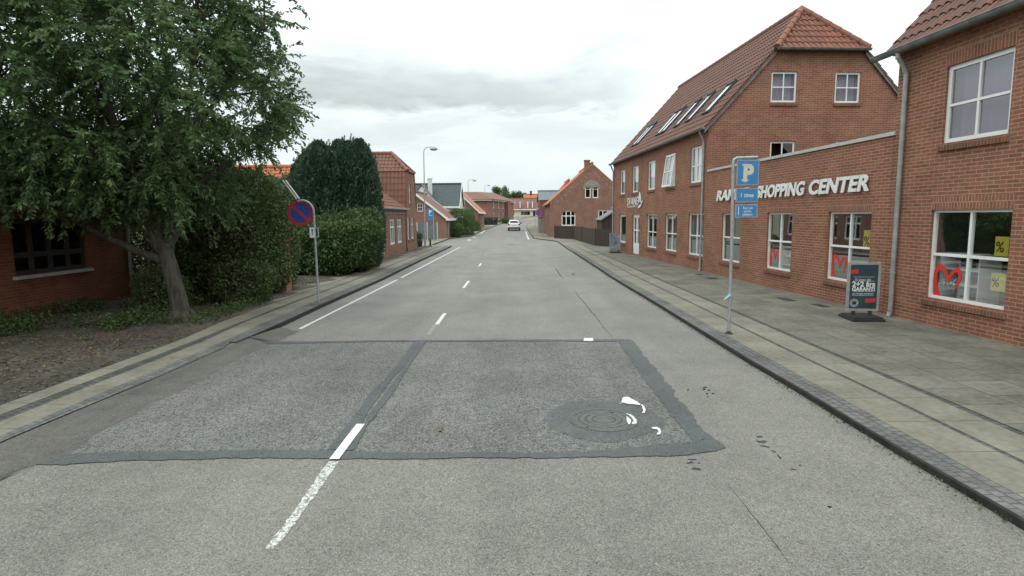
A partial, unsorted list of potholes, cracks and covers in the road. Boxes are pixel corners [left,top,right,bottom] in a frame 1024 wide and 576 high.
crack [730,487,792,570]
manhole cover [569,408,639,432]
